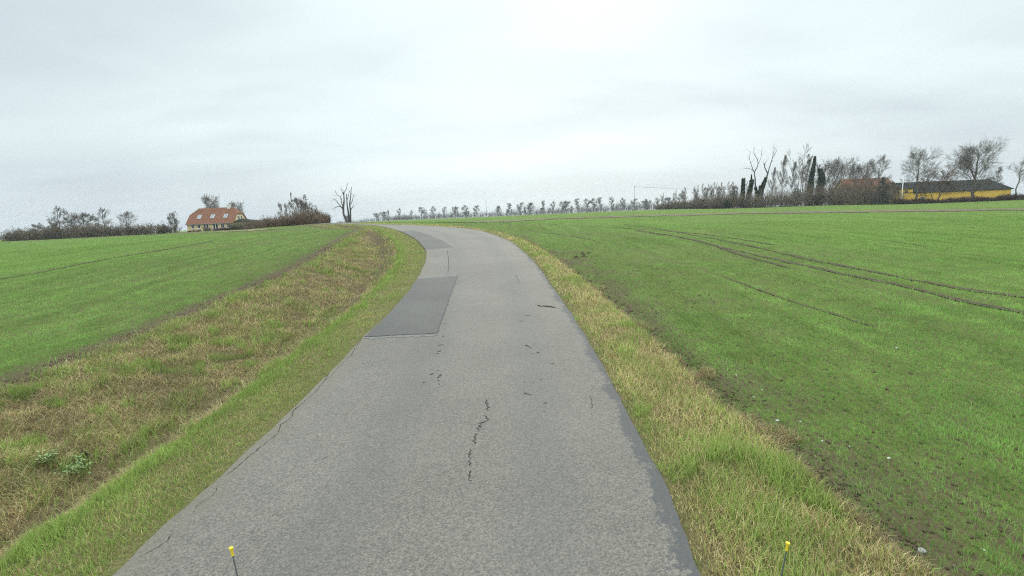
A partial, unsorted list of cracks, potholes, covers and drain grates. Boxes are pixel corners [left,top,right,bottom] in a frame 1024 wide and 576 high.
crack [468,399,490,481]
crack [520,305,560,403]
